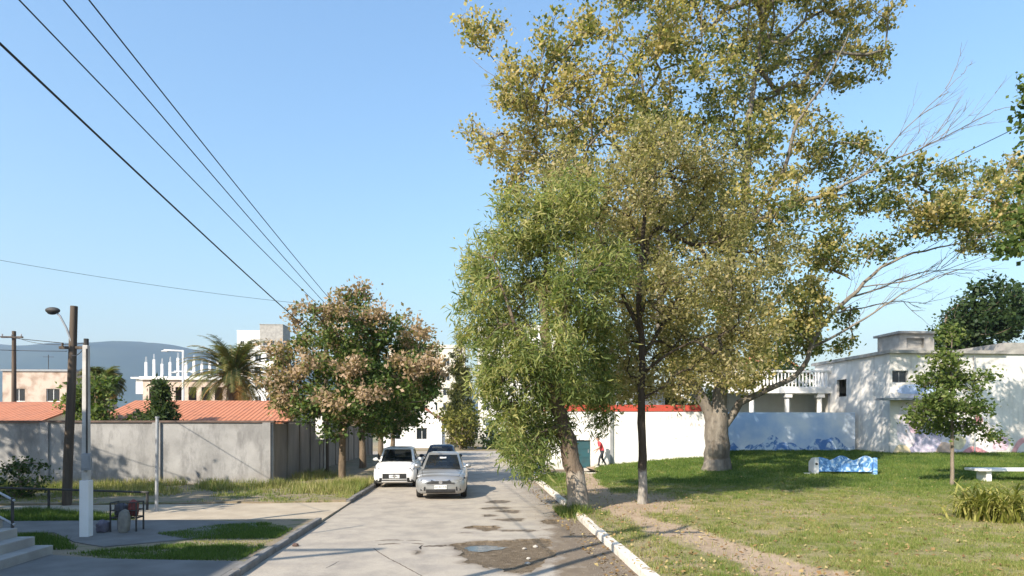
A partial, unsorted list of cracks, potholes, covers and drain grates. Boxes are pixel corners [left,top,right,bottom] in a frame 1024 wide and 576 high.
pothole [447,538,557,574]
